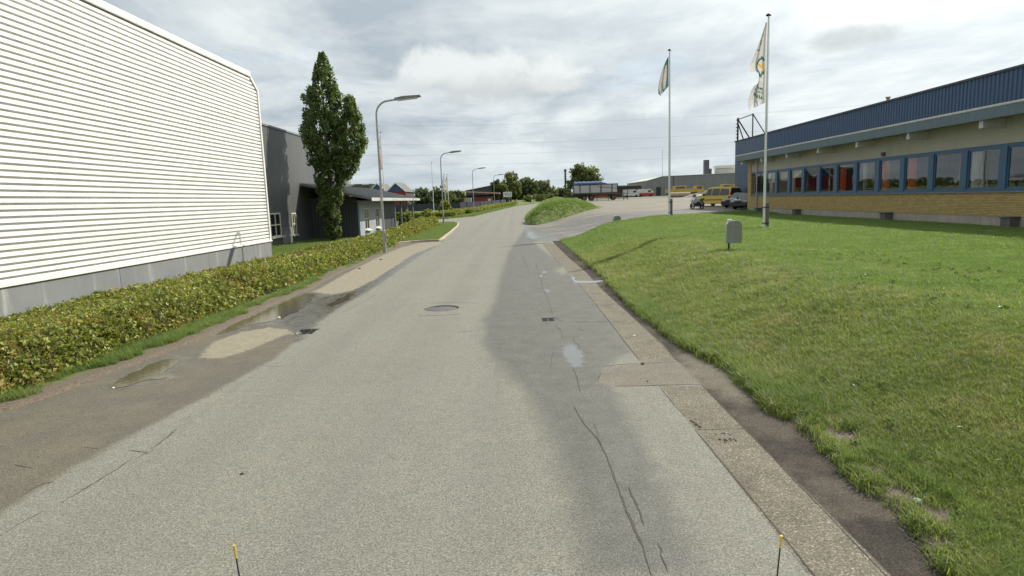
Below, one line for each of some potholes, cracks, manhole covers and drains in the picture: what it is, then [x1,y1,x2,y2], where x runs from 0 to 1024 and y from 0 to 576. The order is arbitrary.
crack [523,258,667,573]
crack [0,414,191,536]
